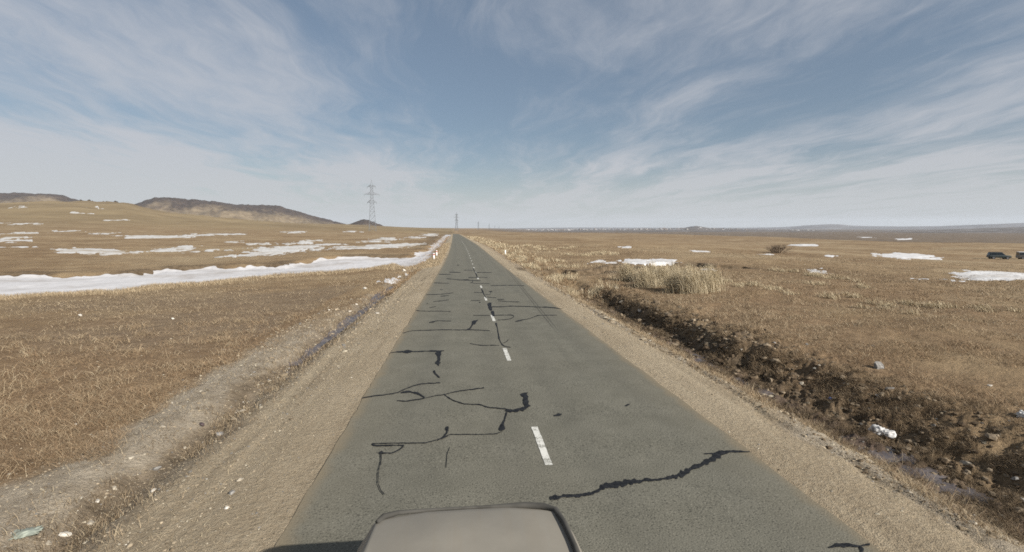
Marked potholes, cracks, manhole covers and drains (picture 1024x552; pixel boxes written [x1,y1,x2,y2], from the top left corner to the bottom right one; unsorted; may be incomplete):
crack [404,272,524,347]
